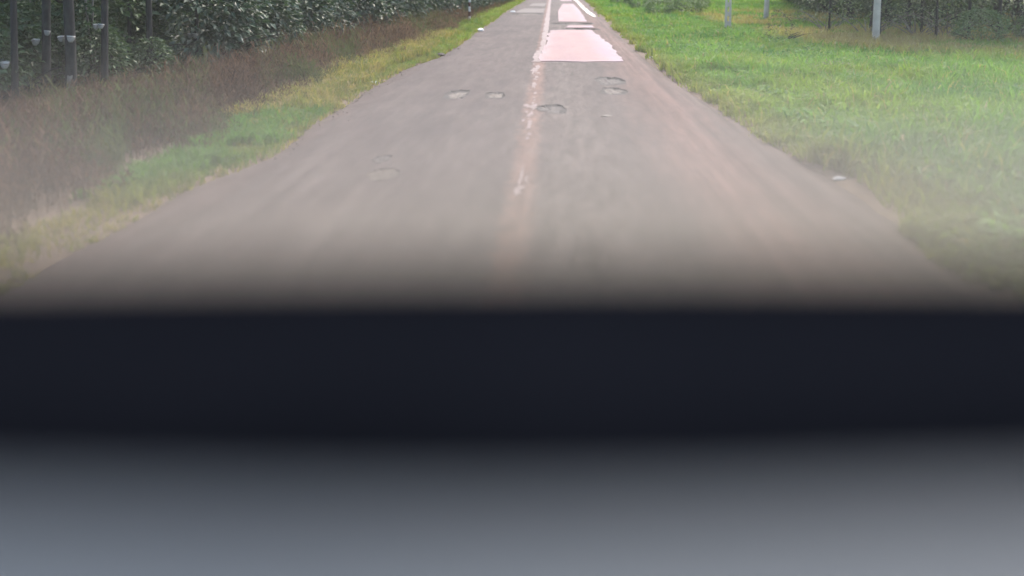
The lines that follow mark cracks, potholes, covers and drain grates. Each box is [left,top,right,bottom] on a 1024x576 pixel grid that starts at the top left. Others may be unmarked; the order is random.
pothole [442,89,471,100]
pothole [365,168,401,181]
pothole [372,155,393,164]
pothole [600,87,629,95]
pothole [594,77,626,86]
pothole [536,104,567,114]
